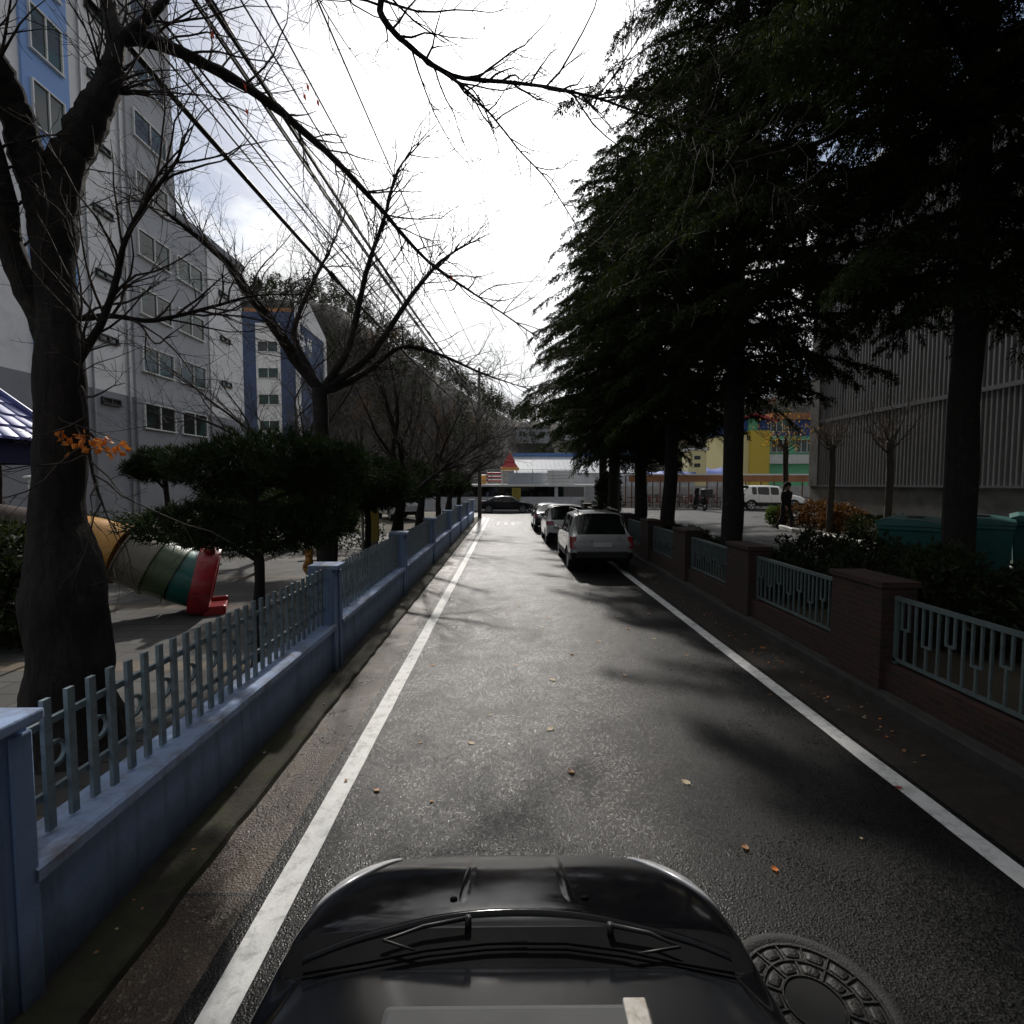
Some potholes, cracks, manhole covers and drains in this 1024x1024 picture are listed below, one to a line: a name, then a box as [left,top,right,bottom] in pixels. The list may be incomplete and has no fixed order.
manhole cover [742,933,909,1024]
